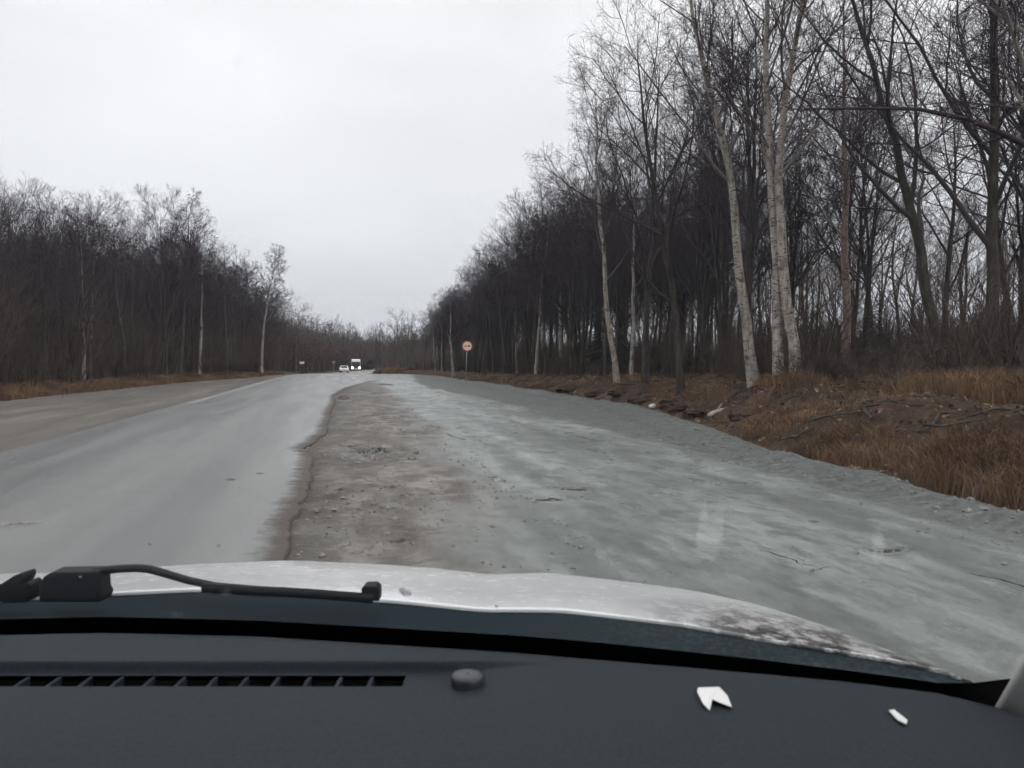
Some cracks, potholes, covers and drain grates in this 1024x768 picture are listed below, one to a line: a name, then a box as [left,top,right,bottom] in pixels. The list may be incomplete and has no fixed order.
pothole [861,546,911,555]
pothole [346,447,401,455]
crack [749,549,830,572]
crack [959,570,1024,595]
